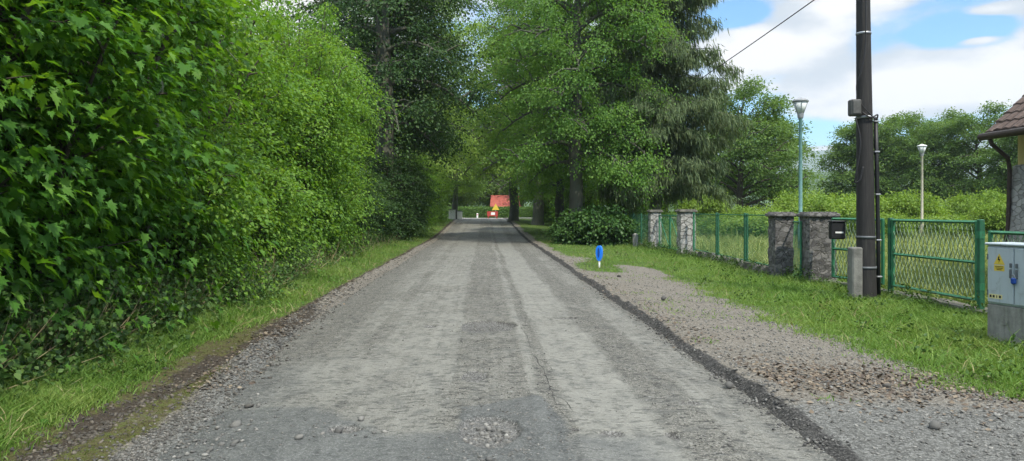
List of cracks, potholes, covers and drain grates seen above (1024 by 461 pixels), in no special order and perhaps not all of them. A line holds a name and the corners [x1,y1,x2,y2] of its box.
pothole [447,410,535,456]
crack [479,327,572,423]
